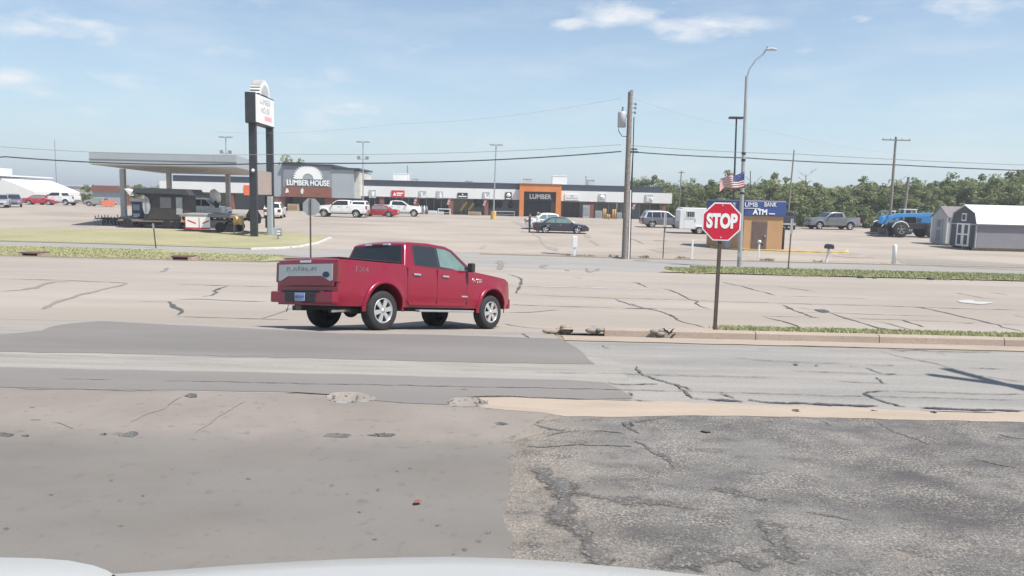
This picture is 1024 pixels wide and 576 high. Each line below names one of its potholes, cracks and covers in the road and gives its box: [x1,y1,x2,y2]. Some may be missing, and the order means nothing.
crack [609,349,1018,444]
crack [531,467,768,566]
crack [155,301,184,314]
crack [922,307,1022,331]
crack [196,402,243,432]
crack [530,417,674,467]
